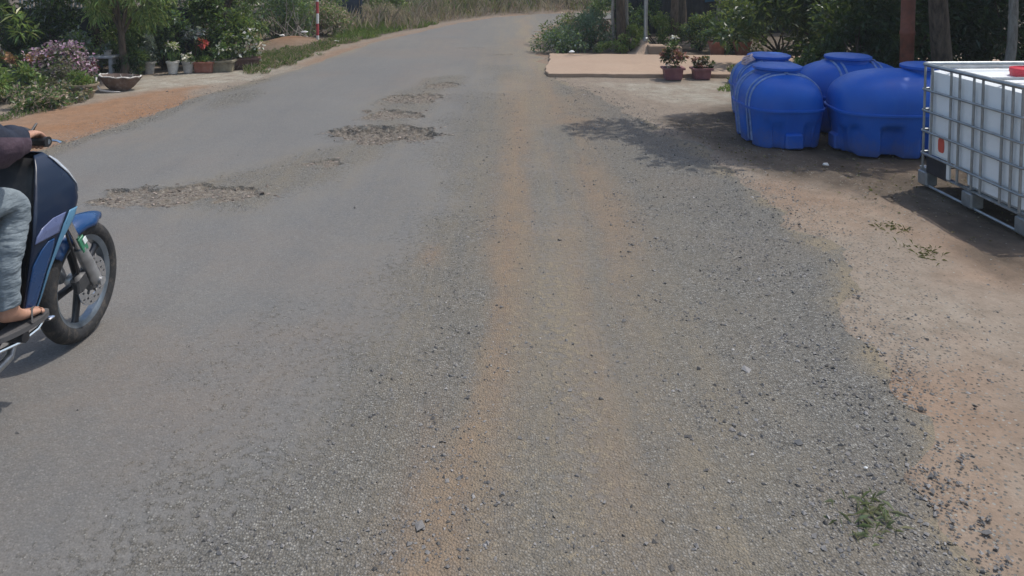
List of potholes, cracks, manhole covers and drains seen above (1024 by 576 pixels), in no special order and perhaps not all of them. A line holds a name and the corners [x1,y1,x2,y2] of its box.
pothole [76,180,290,214]
pothole [351,108,434,123]
pothole [288,156,354,172]
pothole [313,123,460,149]
pothole [369,91,452,107]
pothole [417,80,469,90]
